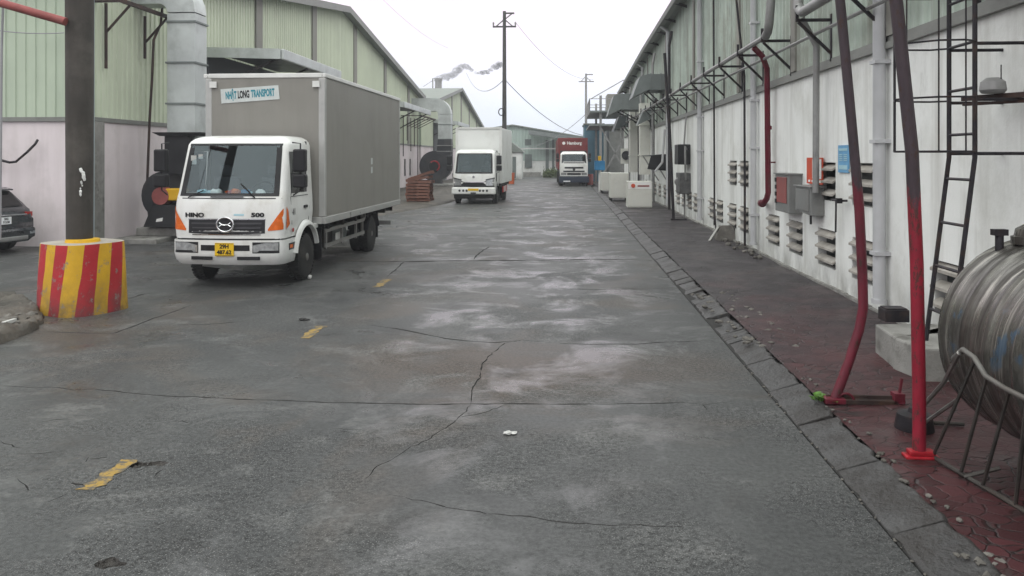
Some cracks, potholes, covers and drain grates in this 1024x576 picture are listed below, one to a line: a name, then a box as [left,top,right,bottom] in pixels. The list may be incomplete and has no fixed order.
crack [389,494,682,527]
crack [14,325,727,480]
crack [353,247,652,275]
pothole [94,557,127,569]
